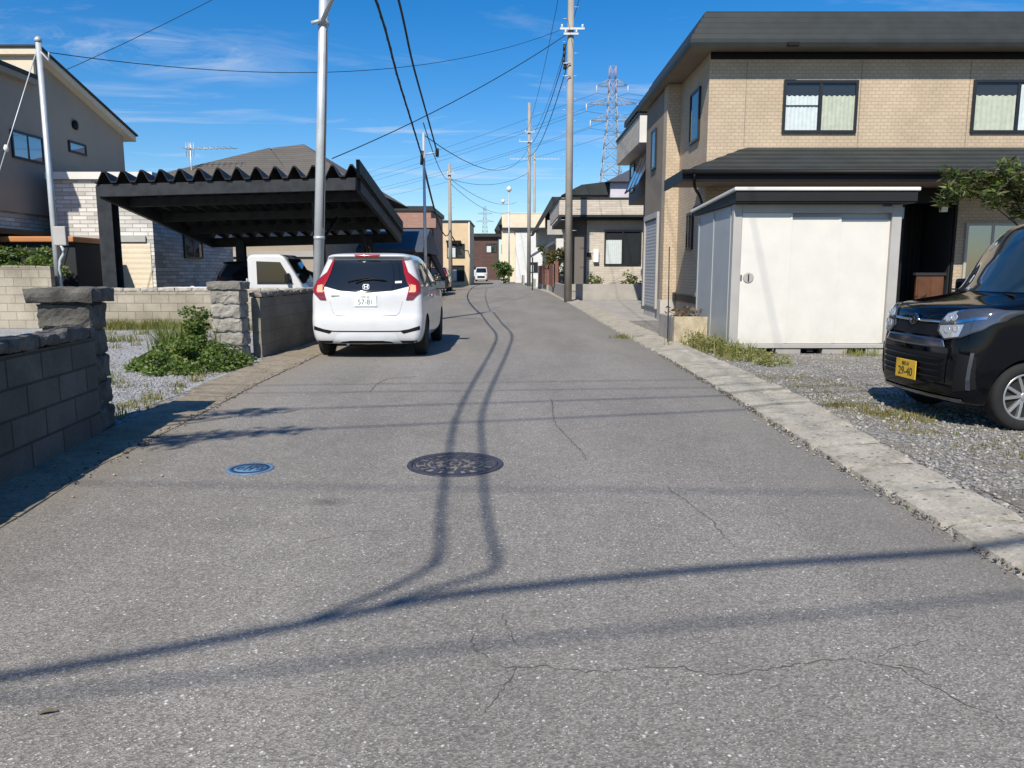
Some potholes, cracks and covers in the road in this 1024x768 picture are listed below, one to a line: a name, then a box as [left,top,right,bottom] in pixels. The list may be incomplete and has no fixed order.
crack [668,487,735,546]
crack [470,616,1008,723]
utility cover [226,463,275,475]
manhole cover [407,452,504,477]
